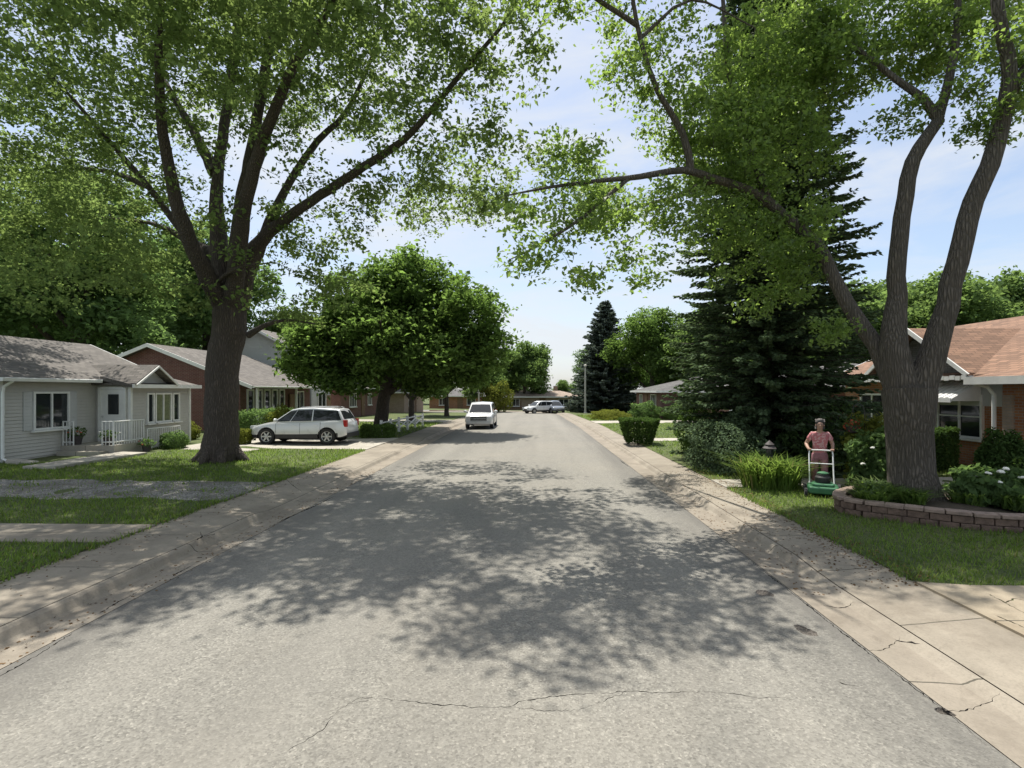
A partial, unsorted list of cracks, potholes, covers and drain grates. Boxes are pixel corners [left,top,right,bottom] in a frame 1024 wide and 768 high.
pothole [793,625,818,636]
crack [286,691,779,752]
